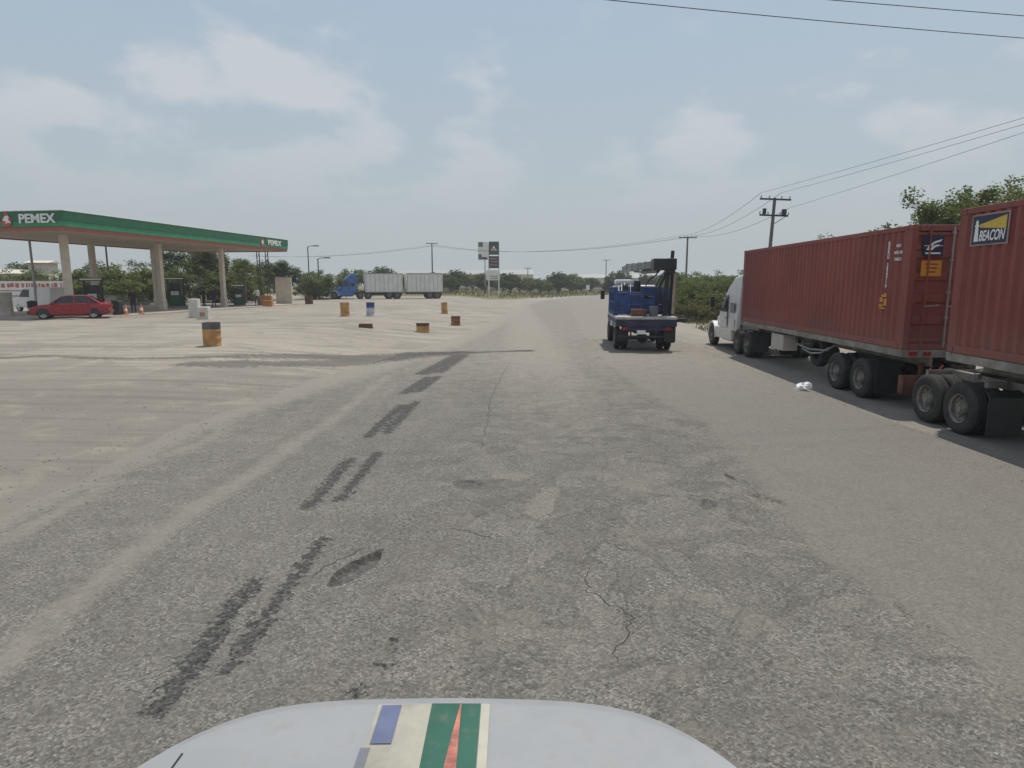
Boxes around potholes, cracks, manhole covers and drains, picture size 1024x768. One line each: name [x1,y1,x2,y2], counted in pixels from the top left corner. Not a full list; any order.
pothole [452,479,485,489]
crack [481,364,509,448]
crack [584,565,635,664]
pothole [327,548,384,587]
